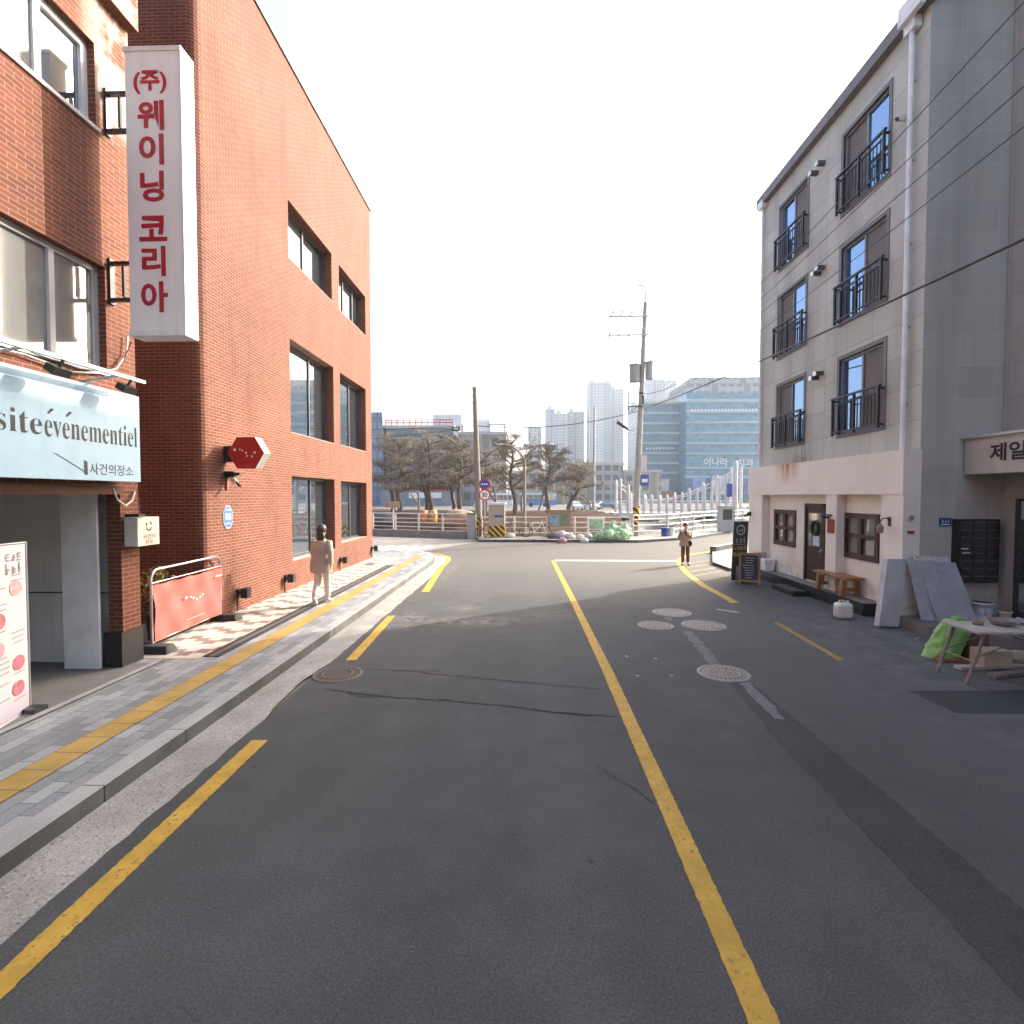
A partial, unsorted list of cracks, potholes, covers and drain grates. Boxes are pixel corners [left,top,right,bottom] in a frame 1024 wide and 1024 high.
manhole cover [652,608,692,617]
manhole cover [311,666,363,683]
crack [325,688,620,717]
crack [376,669,606,689]
manhole cover [637,621,674,630]
manhole cover [696,664,752,682]
manhole cover [681,620,727,631]
